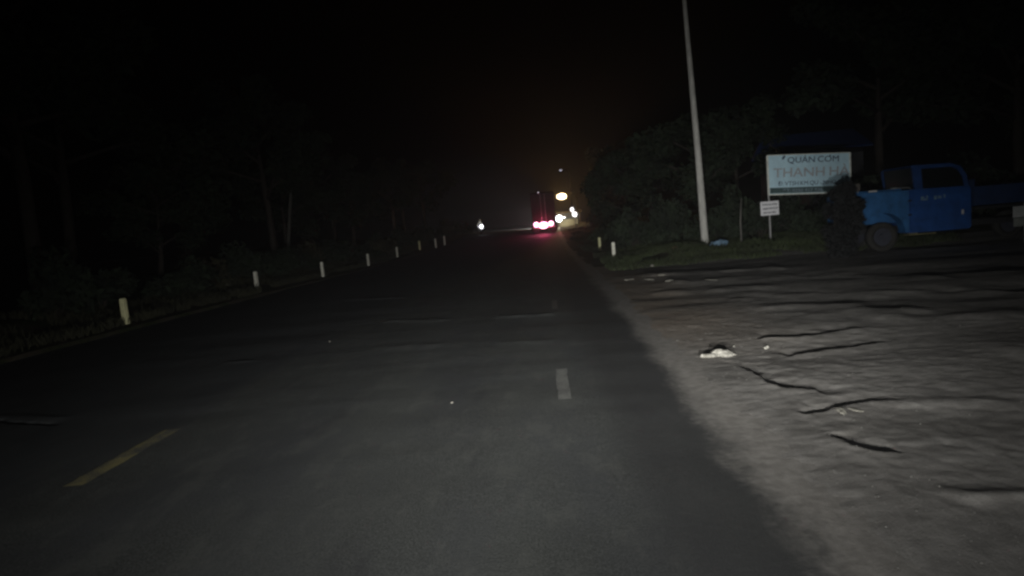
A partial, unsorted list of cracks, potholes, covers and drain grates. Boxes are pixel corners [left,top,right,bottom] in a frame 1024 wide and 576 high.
crack [734,325,911,454]
